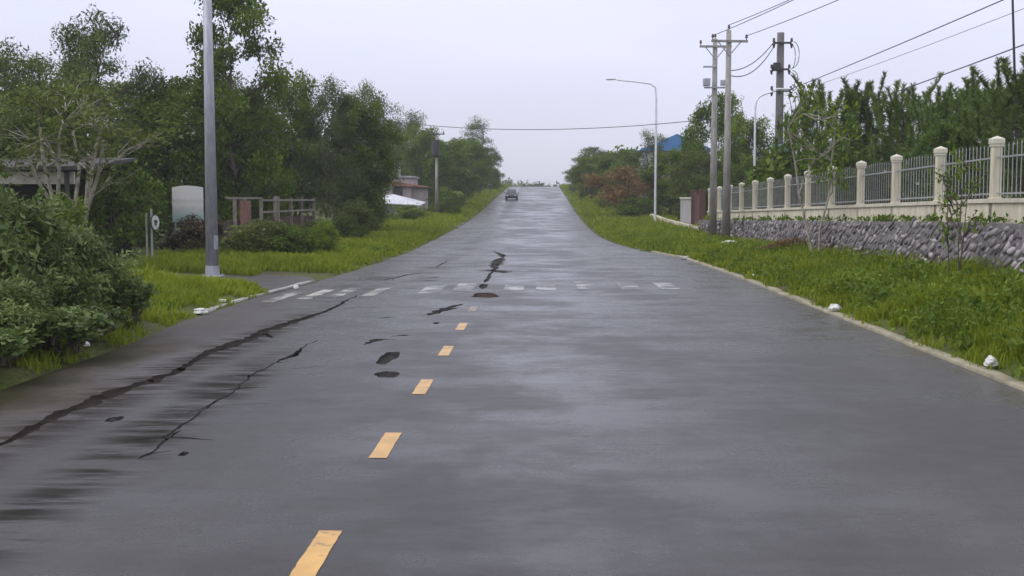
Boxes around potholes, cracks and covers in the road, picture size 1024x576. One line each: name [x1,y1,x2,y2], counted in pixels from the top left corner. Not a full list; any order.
pothole [376,352,400,365]
crack [0,295,408,459]
crack [427,304,463,315]
crack [484,251,512,282]
